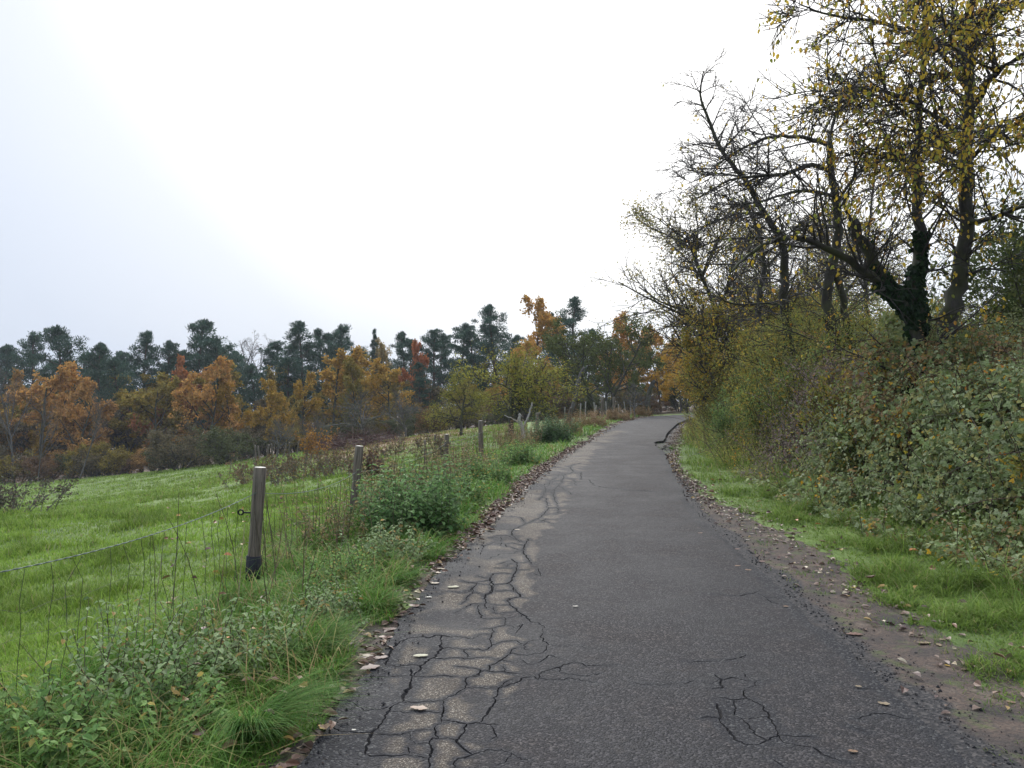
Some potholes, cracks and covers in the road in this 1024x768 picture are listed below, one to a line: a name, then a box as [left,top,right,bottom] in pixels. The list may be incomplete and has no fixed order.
crack [637,654,845,767]
crack [333,463,603,768]
